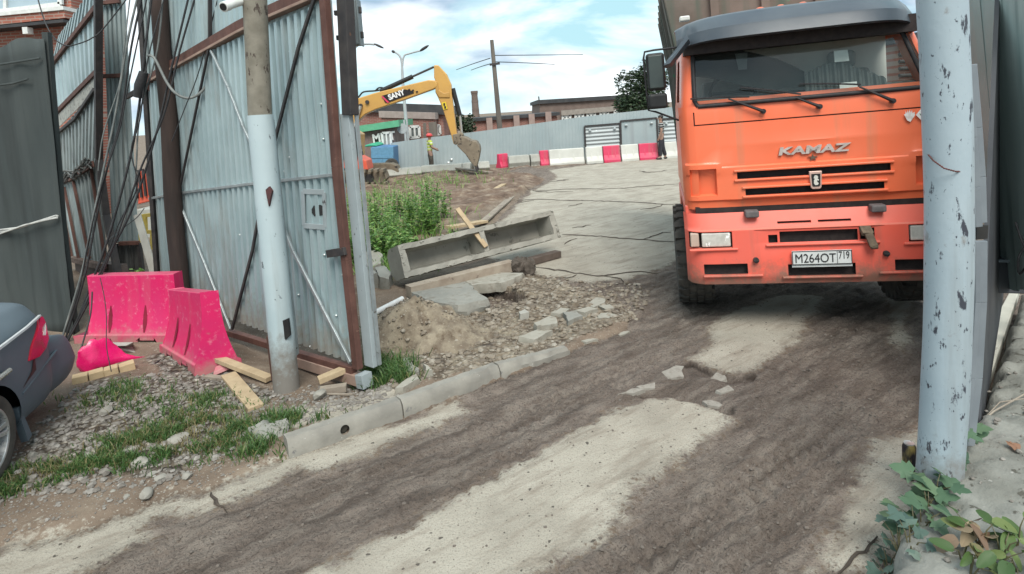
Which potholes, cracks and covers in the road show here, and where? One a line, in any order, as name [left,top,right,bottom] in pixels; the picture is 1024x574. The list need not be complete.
crack [564,225,674,244]
crack [538,267,658,285]
pothole [633,360,761,415]
crack [513,170,667,209]
